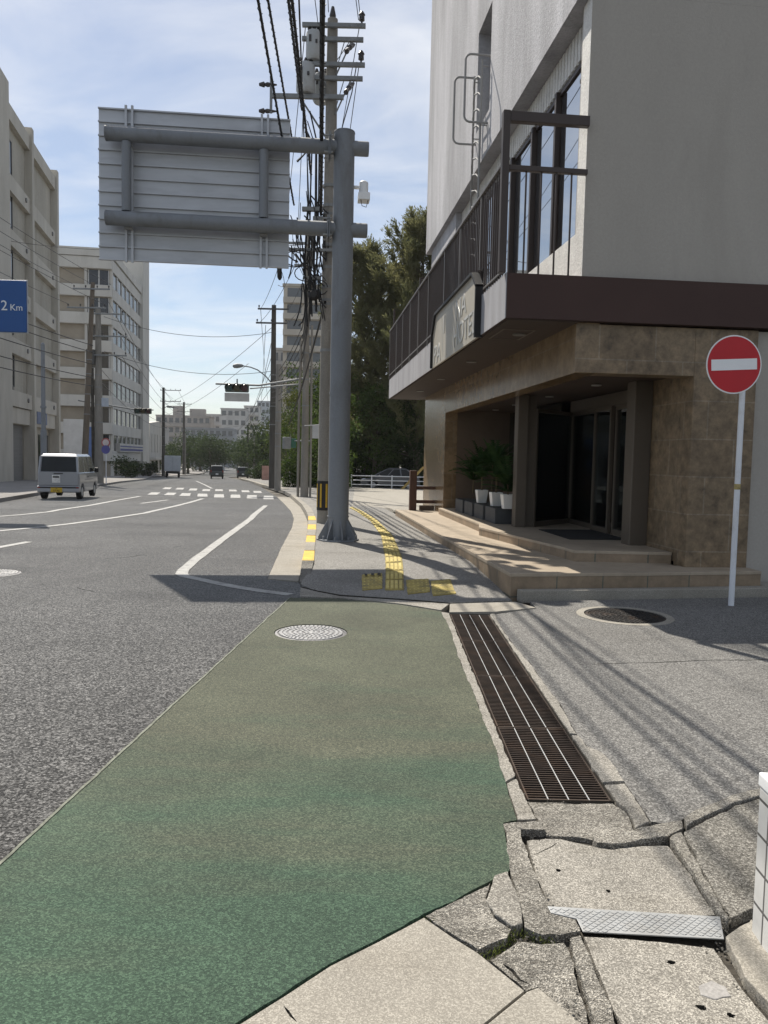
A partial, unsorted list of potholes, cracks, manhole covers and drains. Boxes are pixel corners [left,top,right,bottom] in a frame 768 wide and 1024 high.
drain grate [476,675,563,729]
drain grate [461,640,529,678]
manhole cover [275,625,347,641]
drain grate [450,614,506,641]
manhole cover [576,606,675,626]
drain grate [497,727,611,801]
crack [503,964,528,984]
